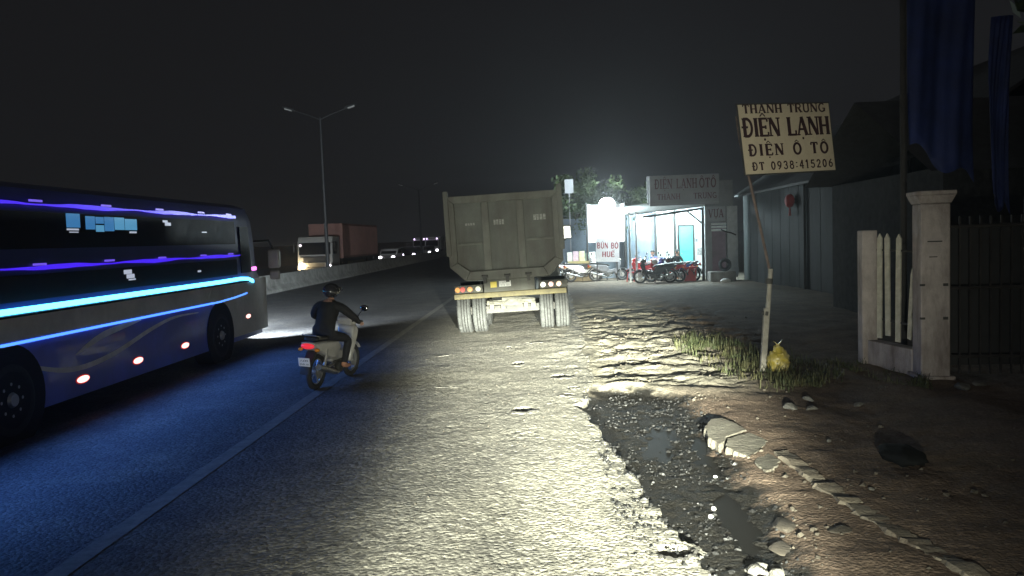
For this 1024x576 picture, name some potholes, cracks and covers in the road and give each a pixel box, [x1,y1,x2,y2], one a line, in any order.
pothole [507,407,540,415]
pothole [657,541,707,563]
